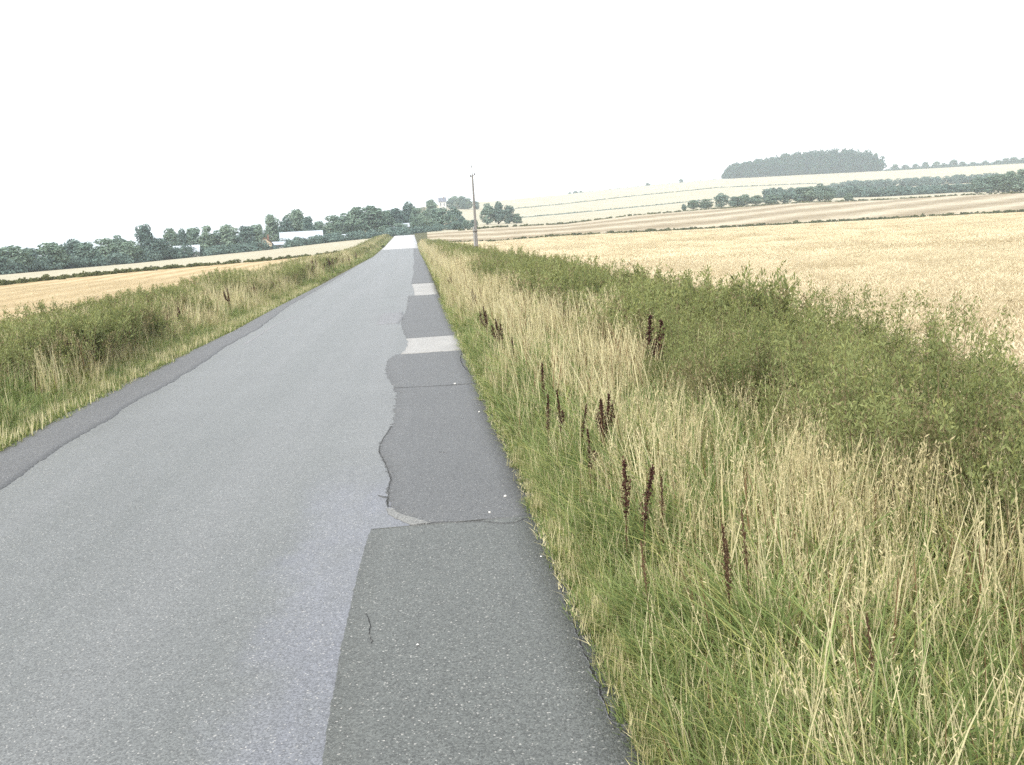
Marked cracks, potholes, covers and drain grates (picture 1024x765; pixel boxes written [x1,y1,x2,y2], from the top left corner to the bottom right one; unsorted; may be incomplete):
crack [378,426,392,507]
